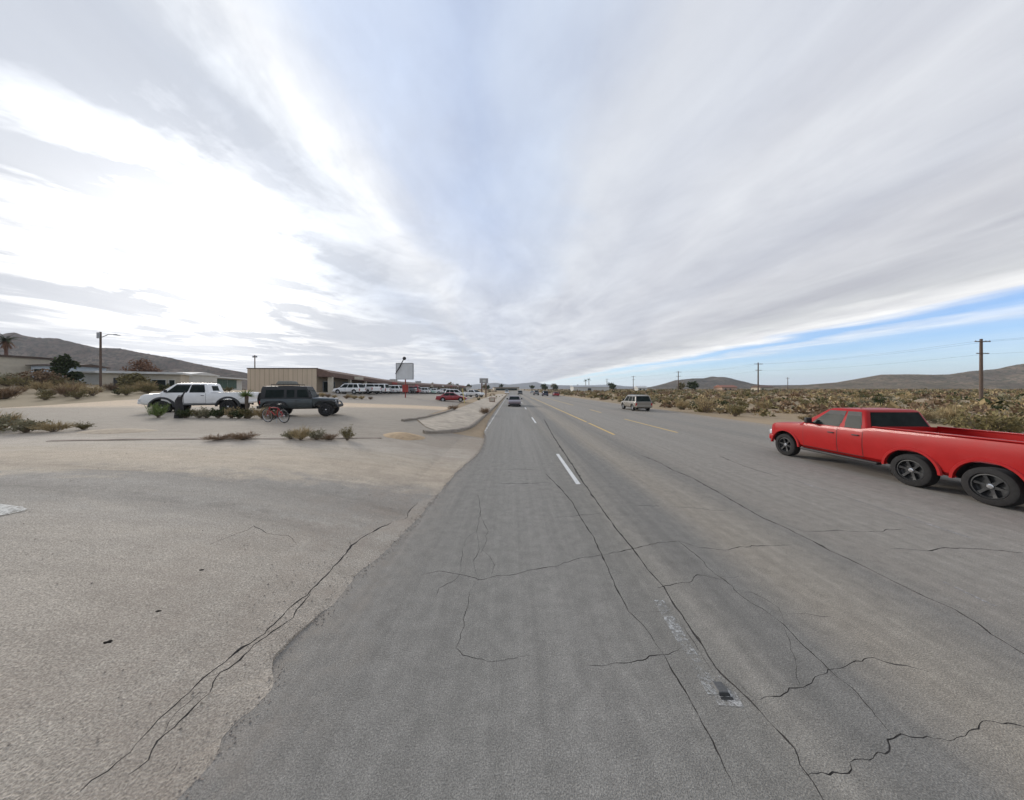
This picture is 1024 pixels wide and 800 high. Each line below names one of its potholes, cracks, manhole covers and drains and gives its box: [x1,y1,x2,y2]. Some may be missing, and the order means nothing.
crack [80,524,389,792]
crack [427,497,1024,776]
